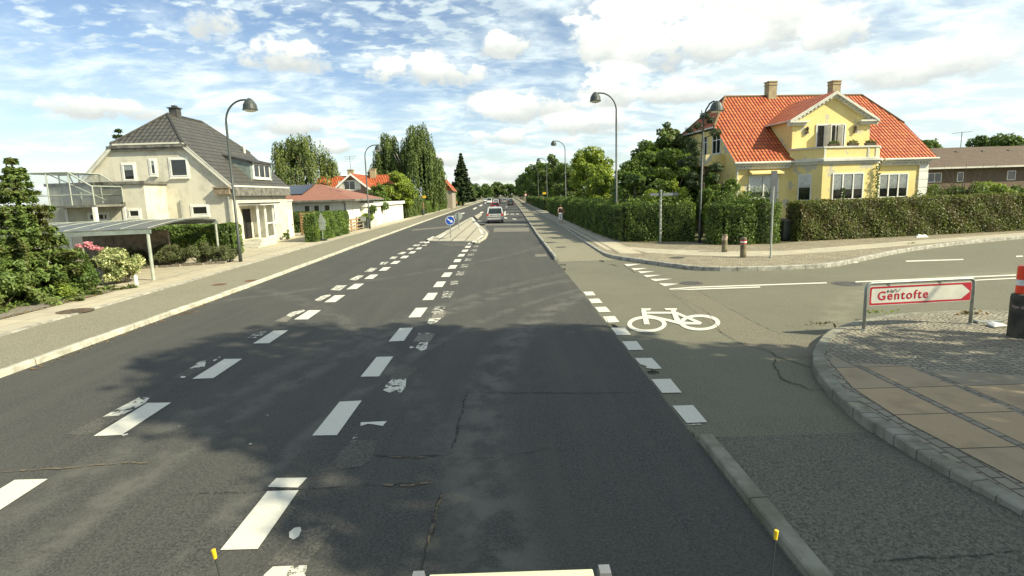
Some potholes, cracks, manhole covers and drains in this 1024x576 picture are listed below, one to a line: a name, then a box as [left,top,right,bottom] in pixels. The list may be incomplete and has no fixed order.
crack [421,491,442,571]
crack [763,348,817,390]
crack [873,551,1021,563]
